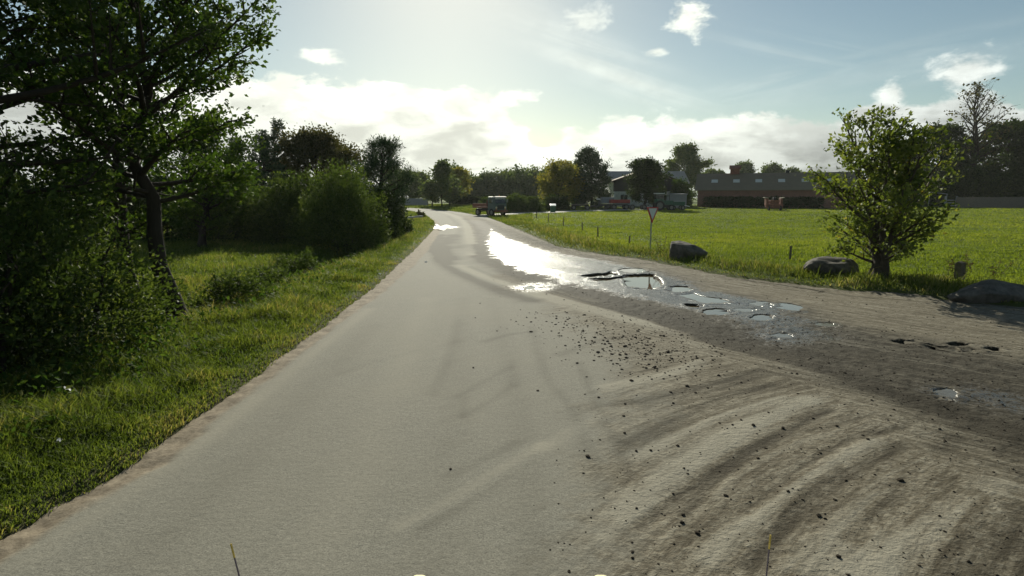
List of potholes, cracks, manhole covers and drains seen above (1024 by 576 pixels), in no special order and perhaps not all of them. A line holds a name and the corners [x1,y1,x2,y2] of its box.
pothole [885,338,935,349]
pothole [653,285,698,295]
pothole [584,273,674,291]
pothole [743,313,779,322]
pothole [695,307,743,316]
pothole [904,341,994,355]
pothole [763,302,811,313]
